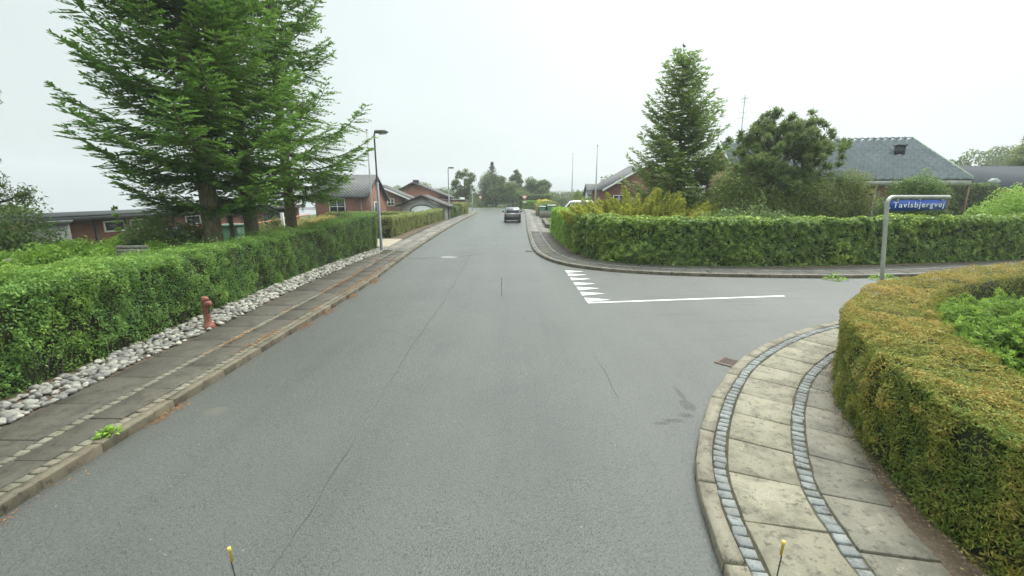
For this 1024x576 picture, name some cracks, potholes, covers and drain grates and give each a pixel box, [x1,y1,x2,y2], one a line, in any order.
drain grate [714,356,739,367]
